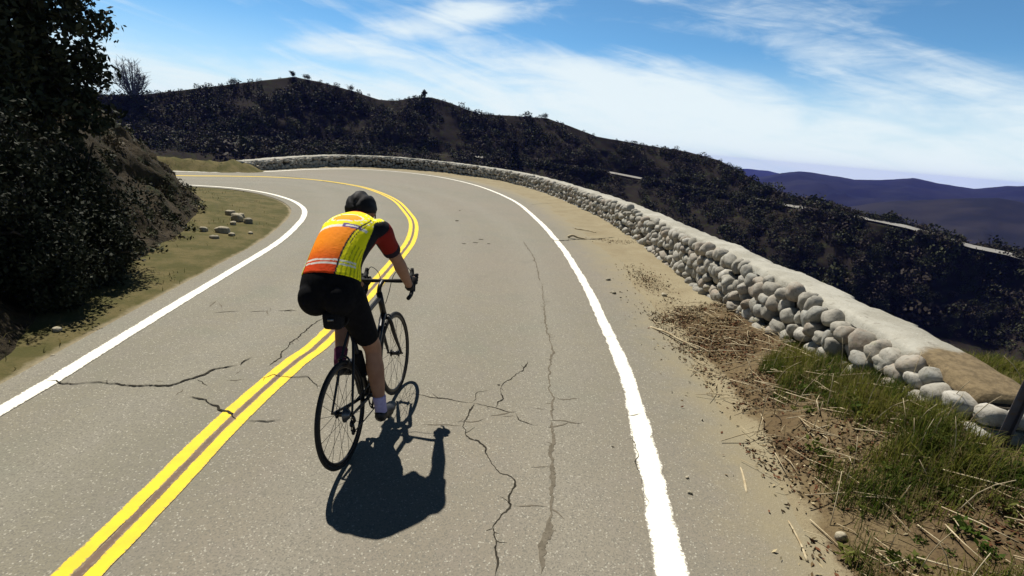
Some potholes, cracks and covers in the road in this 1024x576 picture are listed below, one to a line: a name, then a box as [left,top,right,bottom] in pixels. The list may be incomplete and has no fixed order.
crack [413,361,578,574]
crack [47,357,281,422]
crack [209,300,321,388]
